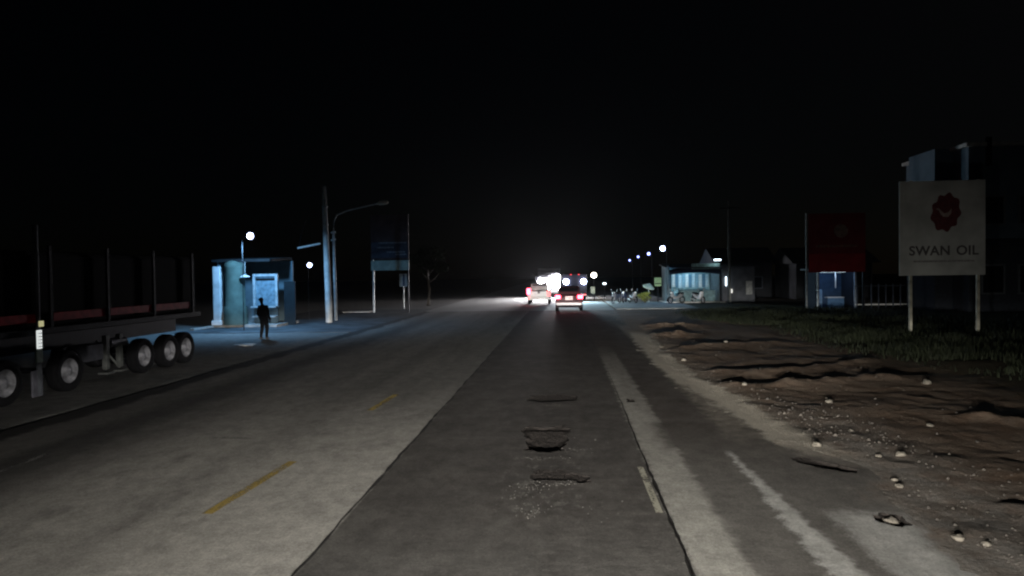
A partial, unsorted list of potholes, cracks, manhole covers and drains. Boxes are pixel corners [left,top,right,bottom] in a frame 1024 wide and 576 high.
pothole [527,394,578,402]
pothole [530,469,592,483]
pothole [791,457,859,473]
pothole [521,424,573,453]
